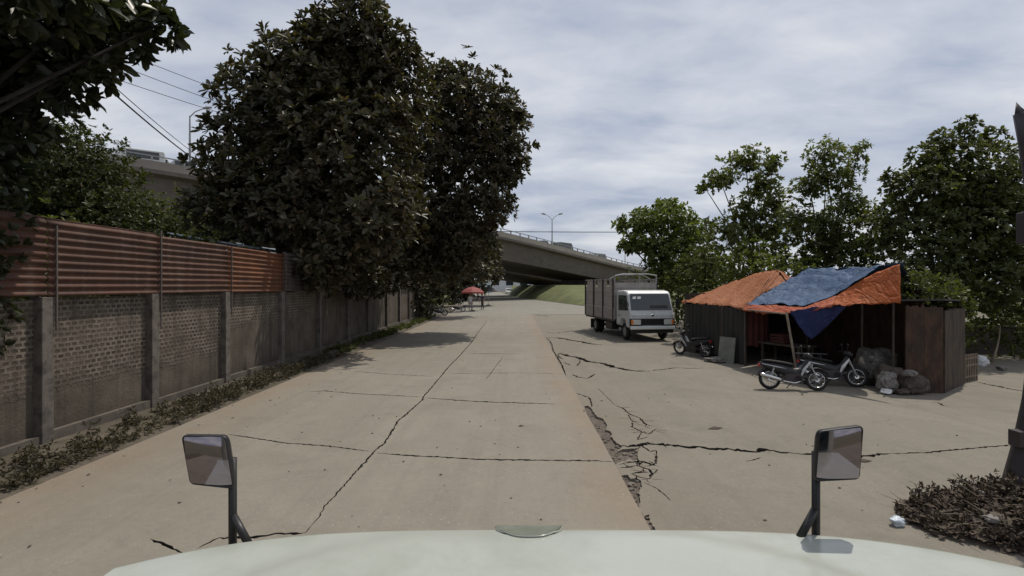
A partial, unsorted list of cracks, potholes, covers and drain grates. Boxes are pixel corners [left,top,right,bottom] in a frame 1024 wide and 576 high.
crack [150,539,182,553]
crack [199,321,487,548]
pothole [584,406,621,462]
crack [539,315,1011,501]
pothole [621,475,642,507]
pothole [614,447,640,464]
